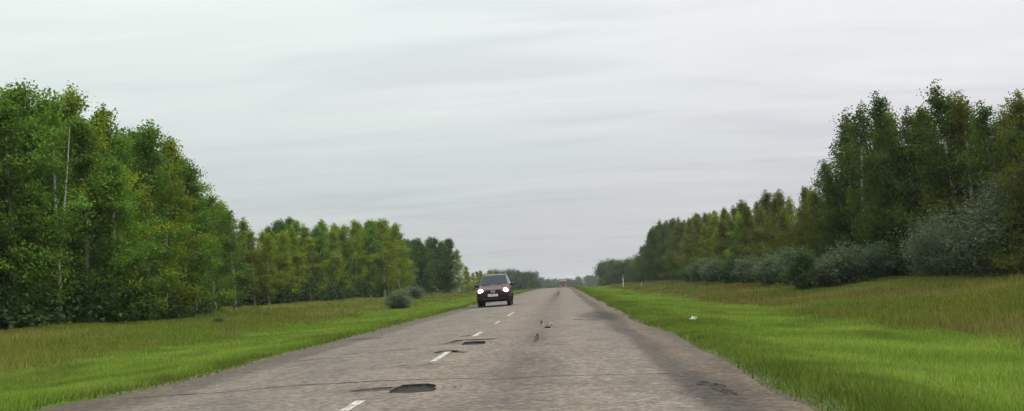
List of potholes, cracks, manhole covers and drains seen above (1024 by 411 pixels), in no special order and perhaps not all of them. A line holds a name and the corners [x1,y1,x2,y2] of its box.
crack [127,335,678,399]
pothole [696,381,737,395]
